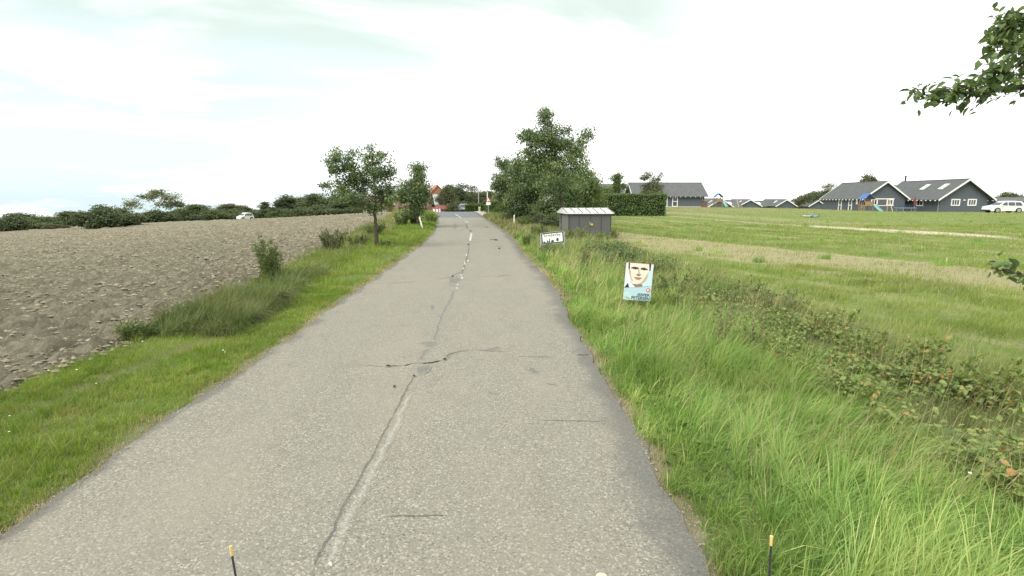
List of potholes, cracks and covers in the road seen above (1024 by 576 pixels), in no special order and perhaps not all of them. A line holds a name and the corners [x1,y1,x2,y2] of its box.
crack [371,349,485,375]
